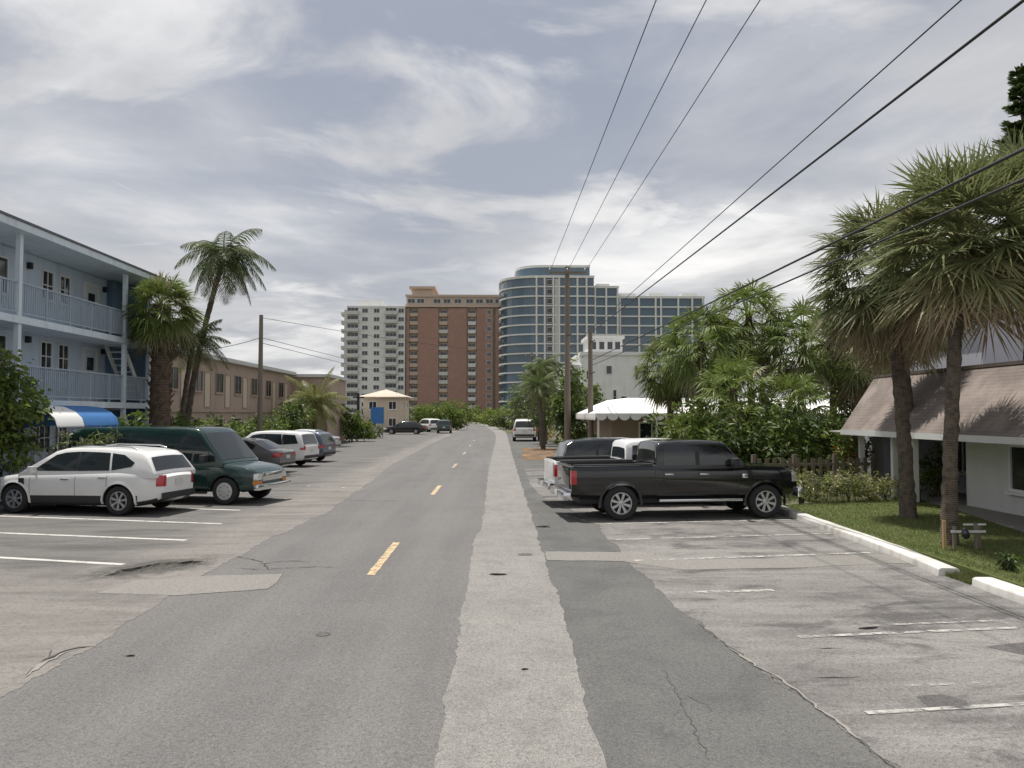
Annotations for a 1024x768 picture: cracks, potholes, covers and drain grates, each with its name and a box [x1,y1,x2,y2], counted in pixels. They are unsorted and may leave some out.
crack [665,671,711,761]
crack [24,646,90,678]
pothole [98,560,206,578]
crack [238,556,322,569]
